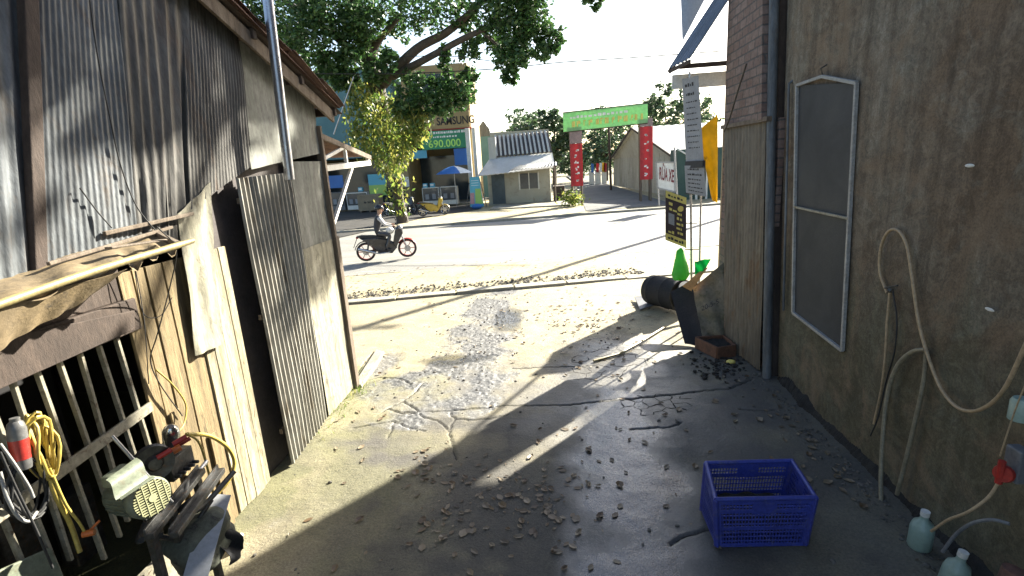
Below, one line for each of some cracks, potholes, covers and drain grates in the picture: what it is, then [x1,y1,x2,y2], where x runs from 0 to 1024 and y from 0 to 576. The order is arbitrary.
crack [620,394,693,427]
crack [356,378,500,461]
